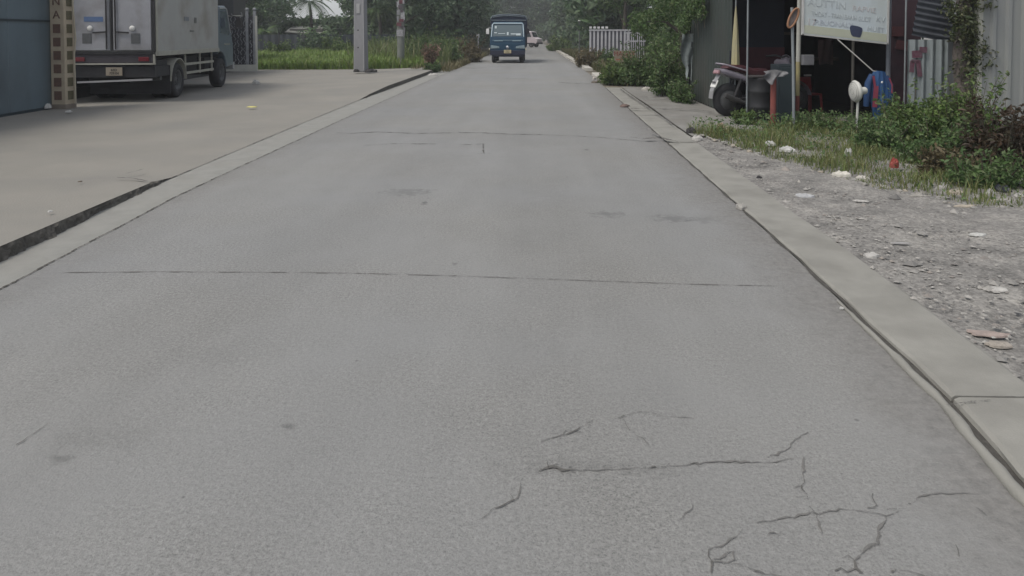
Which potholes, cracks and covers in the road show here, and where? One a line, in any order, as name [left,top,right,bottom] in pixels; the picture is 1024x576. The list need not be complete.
crack [483,432,985,576]
